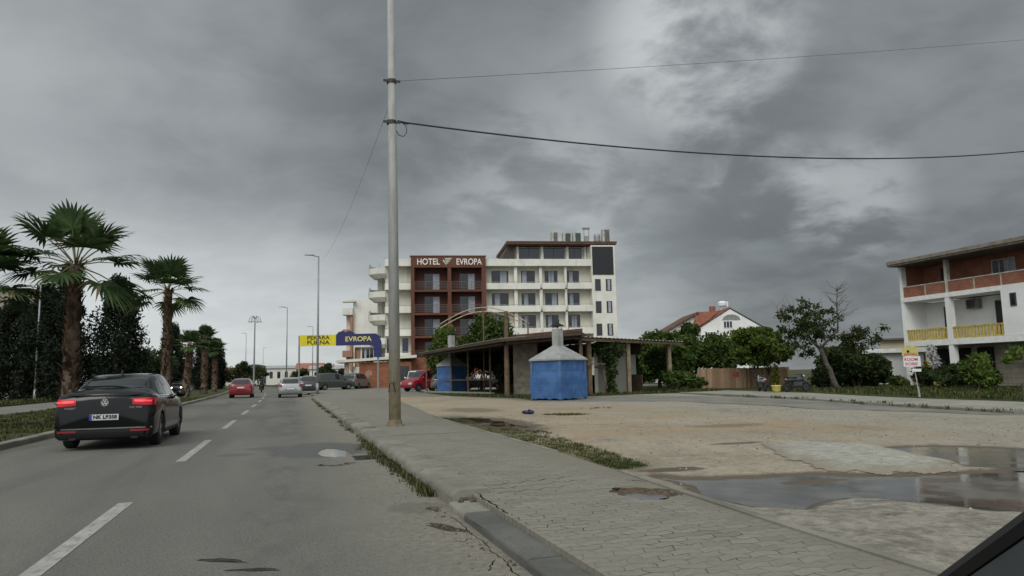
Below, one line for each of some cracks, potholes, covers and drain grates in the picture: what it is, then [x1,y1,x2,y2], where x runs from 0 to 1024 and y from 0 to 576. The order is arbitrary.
pothole [427,522,470,533]
pothole [609,487,683,500]
crack [451,494,520,576]
